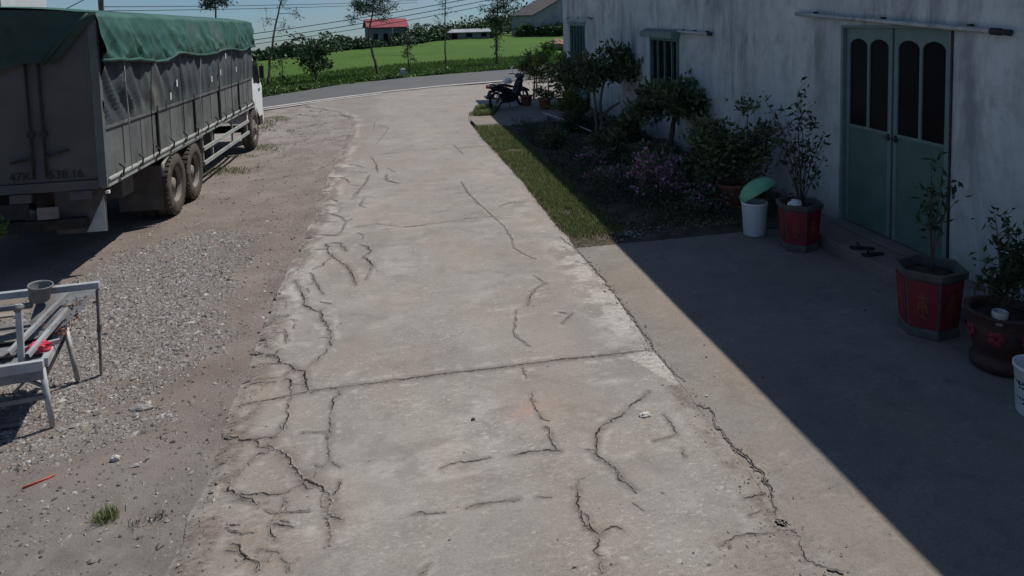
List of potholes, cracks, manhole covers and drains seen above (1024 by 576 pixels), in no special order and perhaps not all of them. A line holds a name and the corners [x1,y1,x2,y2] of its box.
crack [571,390,687,574]
crack [453,144,574,347]
crack [440,366,561,469]
crack [411,496,552,573]
crack [223,114,402,572]
